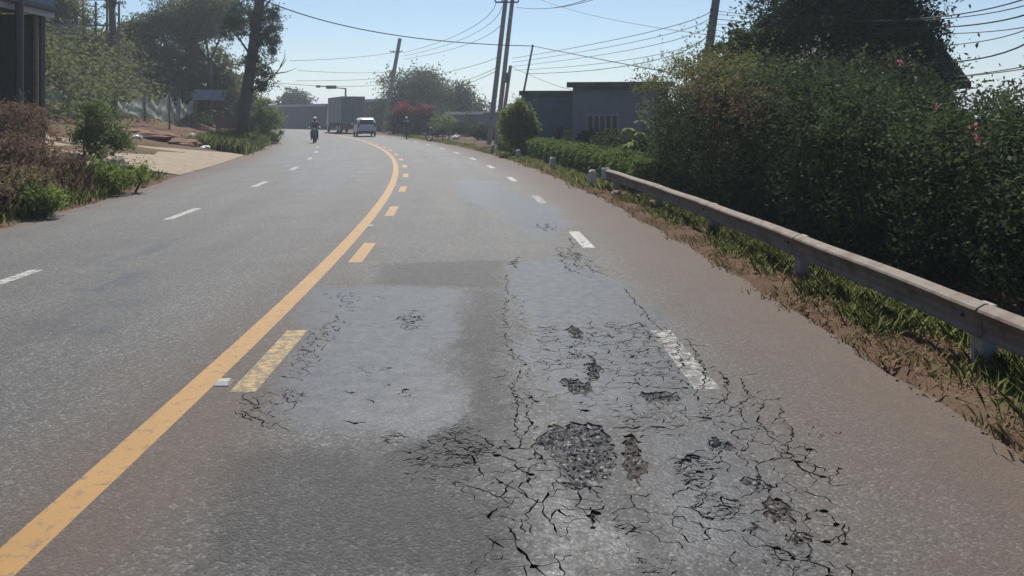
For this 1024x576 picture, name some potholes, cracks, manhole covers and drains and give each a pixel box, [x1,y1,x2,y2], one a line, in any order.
pothole [707,436,737,452]
pothole [620,433,648,487]
pothole [565,326,584,340]
crack [344,224,855,576]
pothole [639,390,681,406]
pothole [533,421,619,493]
crack [233,292,386,431]
pothole [584,362,602,381]
pothole [761,495,797,526]
pothole [559,378,594,396]
